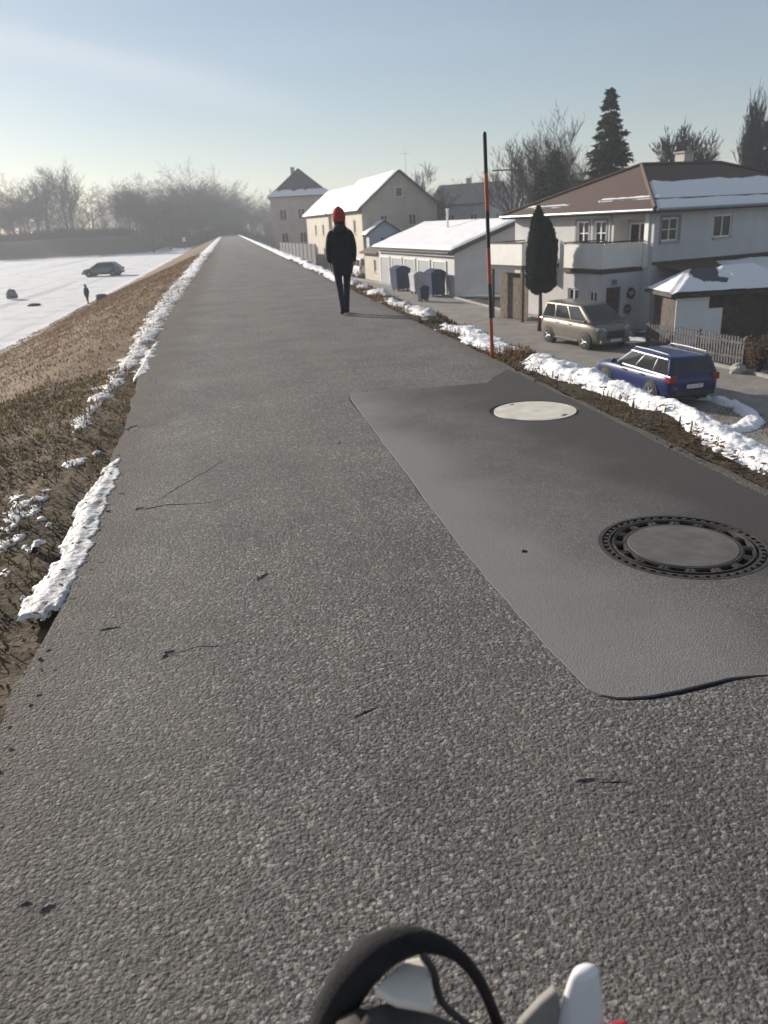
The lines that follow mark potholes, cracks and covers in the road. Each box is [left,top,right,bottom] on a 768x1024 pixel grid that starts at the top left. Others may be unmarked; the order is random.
crack [147,458,227,509]
manhole cover [598,515,768,580]
pothole [39,904,56,916]
manhole cover [488,400,581,422]
